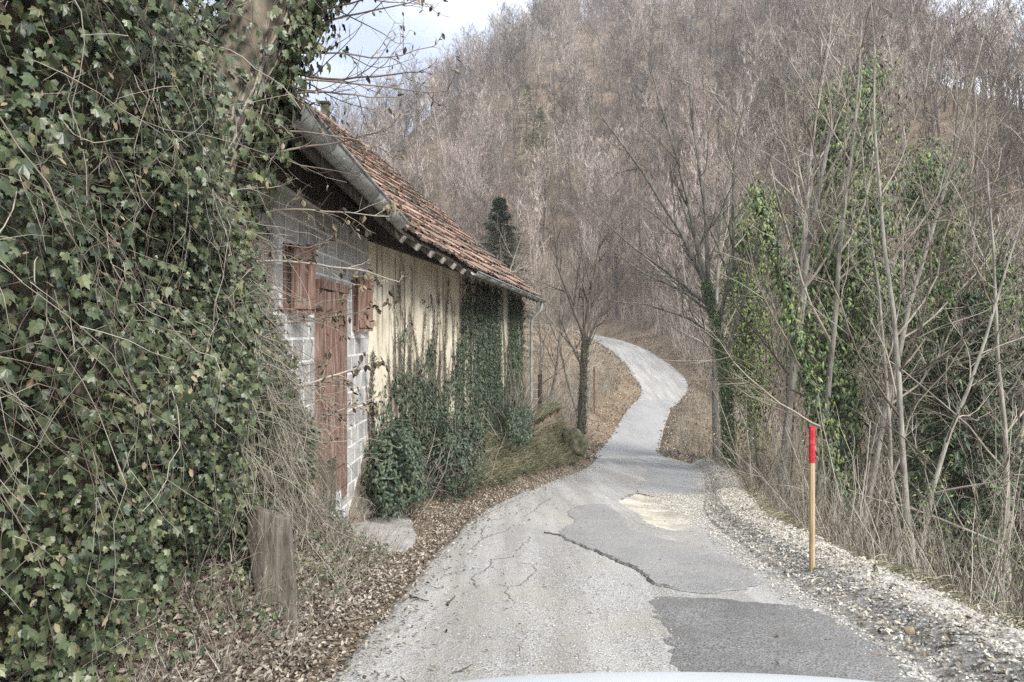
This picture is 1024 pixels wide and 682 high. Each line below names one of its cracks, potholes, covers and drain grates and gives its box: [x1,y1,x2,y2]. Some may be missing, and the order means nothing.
crack [471,496,551,599]
pothole [610,492,704,532]
